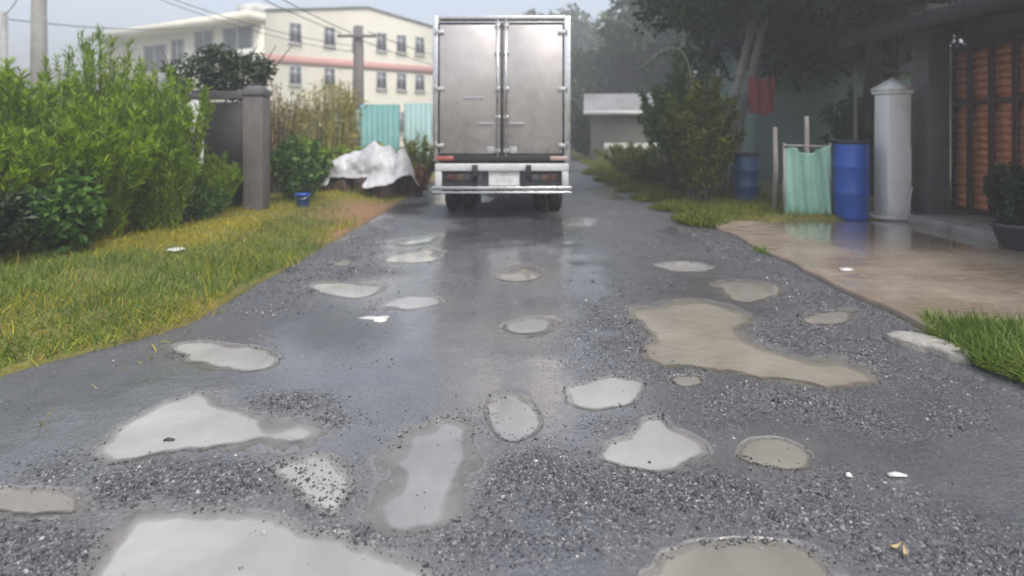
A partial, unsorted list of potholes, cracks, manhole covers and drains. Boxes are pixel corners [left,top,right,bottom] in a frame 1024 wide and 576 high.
pothole [482,388,545,443]
pothole [258,450,359,518]
pothole [0,484,99,525]
pothole [734,435,815,471]
pothole [89,389,339,466]
pothole [651,261,716,271]
pothole [494,264,547,282]
pothole [637,536,851,576]
pothole [365,293,445,311]
pothole [595,413,714,477]
pothole [304,280,391,299]
pothole [708,278,787,304]
